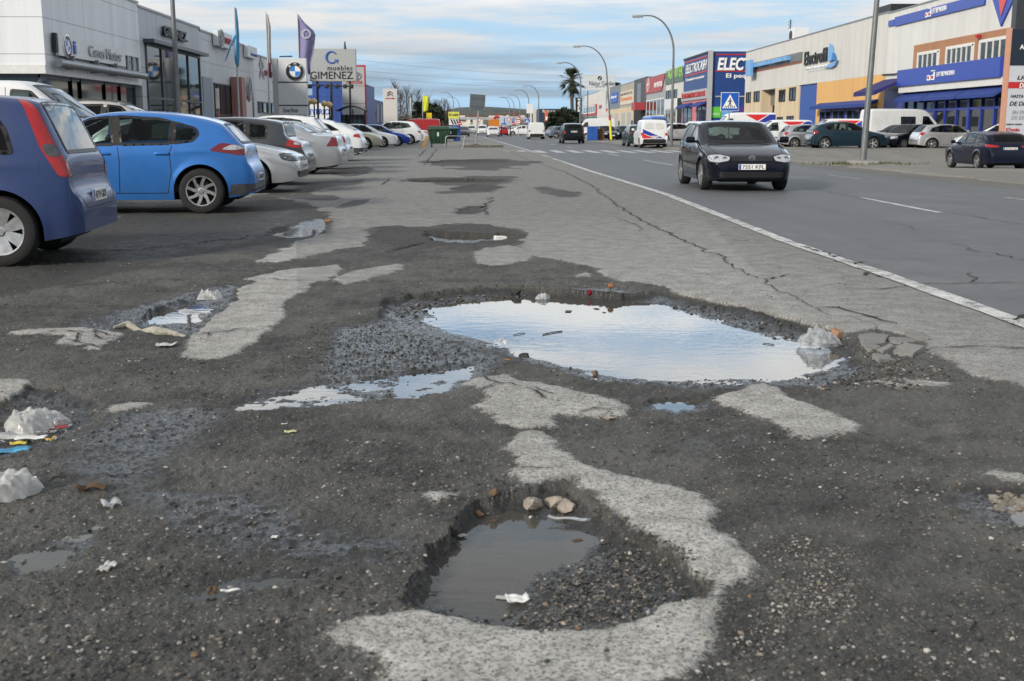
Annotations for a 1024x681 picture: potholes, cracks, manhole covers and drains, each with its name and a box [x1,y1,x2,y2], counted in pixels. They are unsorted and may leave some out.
pothole [424,230,514,243]
pothole [377,284,872,387]
pothole [130,283,242,337]
pothole [264,216,329,238]
pothole [400,483,711,630]
crack [518,155,897,333]
